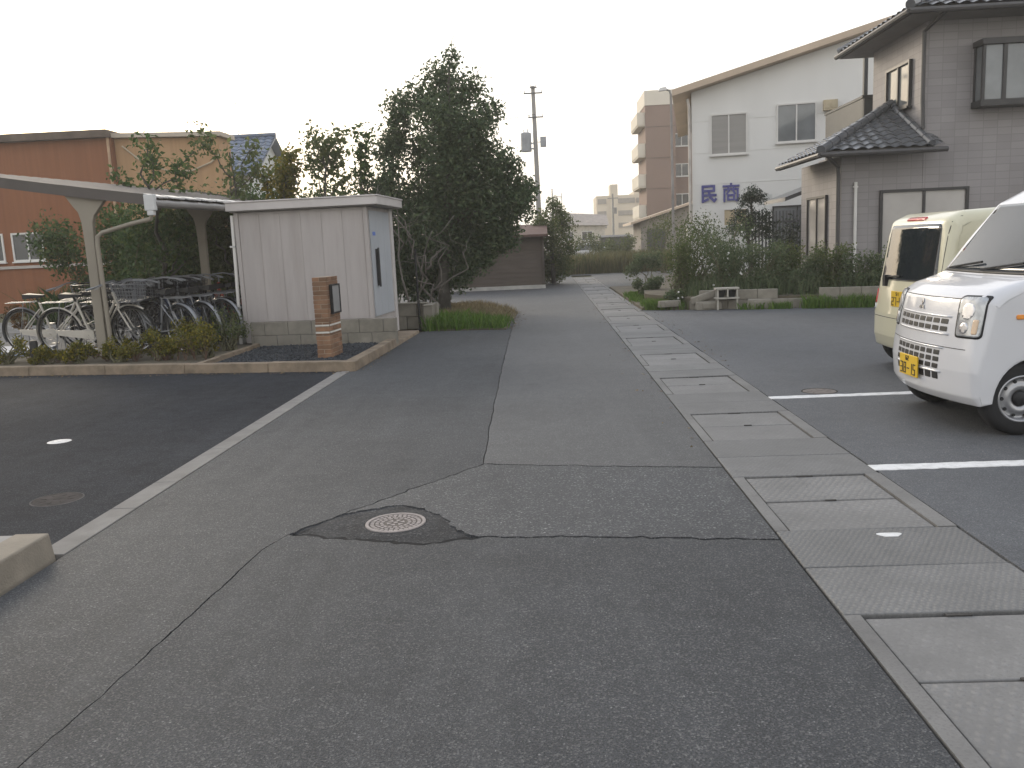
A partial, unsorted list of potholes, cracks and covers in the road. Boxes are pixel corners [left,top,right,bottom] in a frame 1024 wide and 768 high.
crack [292,534,478,545]
manhole cover [29,492,85,507]
manhole cover [365,513,426,533]
